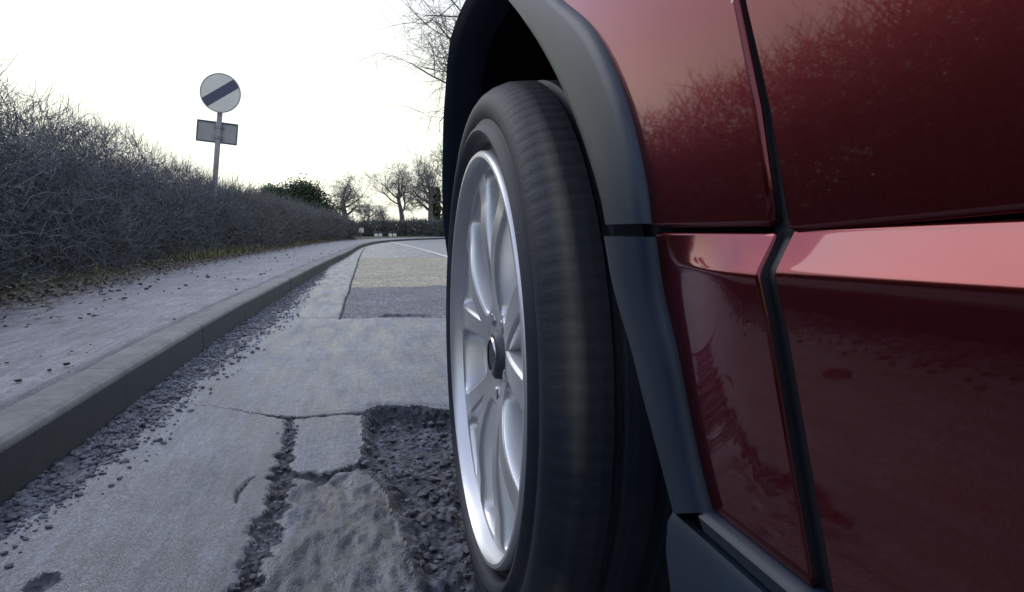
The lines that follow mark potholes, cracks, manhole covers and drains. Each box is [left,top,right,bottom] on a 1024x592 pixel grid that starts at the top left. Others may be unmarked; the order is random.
pothole [352,404,480,592]
pothole [21,571,62,592]
crack [195,404,361,592]
